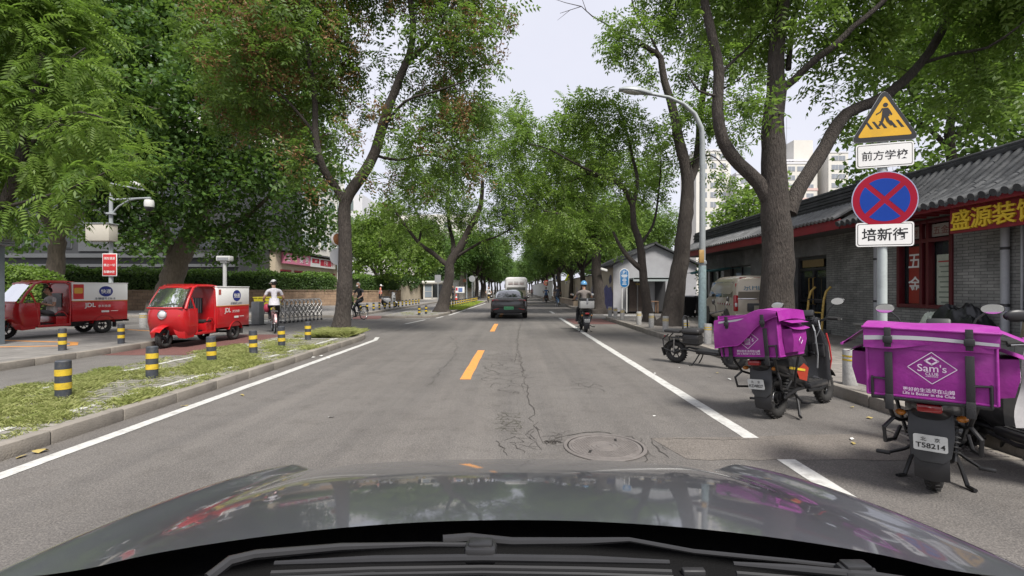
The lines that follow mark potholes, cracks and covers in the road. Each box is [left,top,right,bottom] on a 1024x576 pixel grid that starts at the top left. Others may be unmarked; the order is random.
crack [481,318,746,462]
manhole cover [563,433,647,461]
